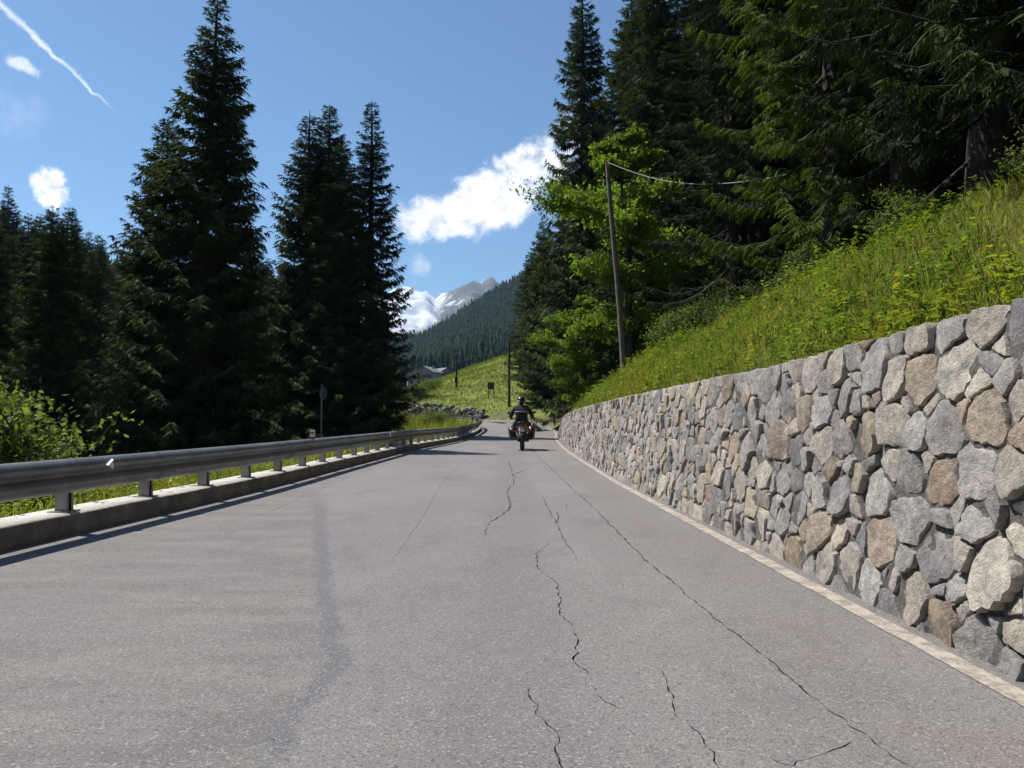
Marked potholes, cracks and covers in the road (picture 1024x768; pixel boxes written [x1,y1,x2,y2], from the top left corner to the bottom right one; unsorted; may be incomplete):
crack [484,461,527,536]
crack [531,448,915,768]
